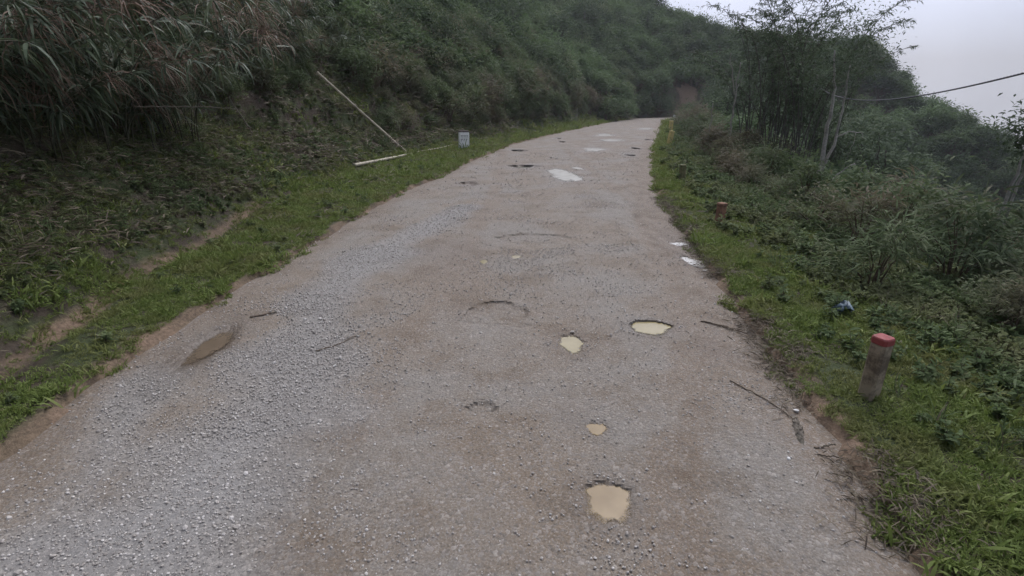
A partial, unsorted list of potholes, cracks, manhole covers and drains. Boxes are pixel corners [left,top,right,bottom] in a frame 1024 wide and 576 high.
pothole [620,317,683,340]
pothole [574,416,619,445]
pothole [547,331,595,362]
pothole [675,252,709,273]
pothole [451,395,510,429]
pothole [450,298,543,349]
pothole [542,167,590,183]
pothole [480,232,581,252]
